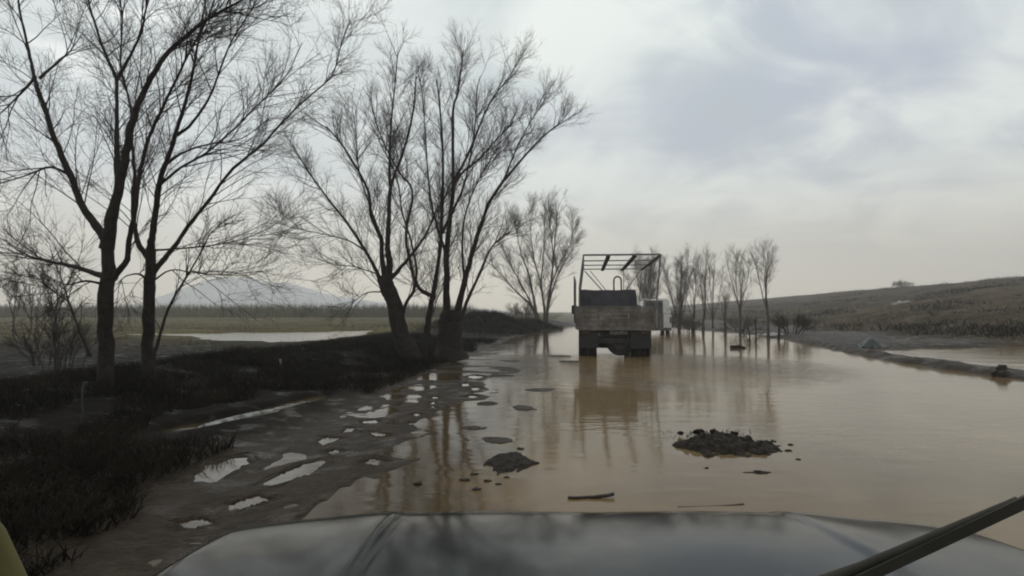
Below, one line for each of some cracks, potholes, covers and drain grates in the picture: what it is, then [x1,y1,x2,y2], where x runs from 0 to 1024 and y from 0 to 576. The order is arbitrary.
pothole [183,453,259,485]
pothole [255,458,334,488]
pothole [311,435,348,447]
pothole [213,491,281,513]
